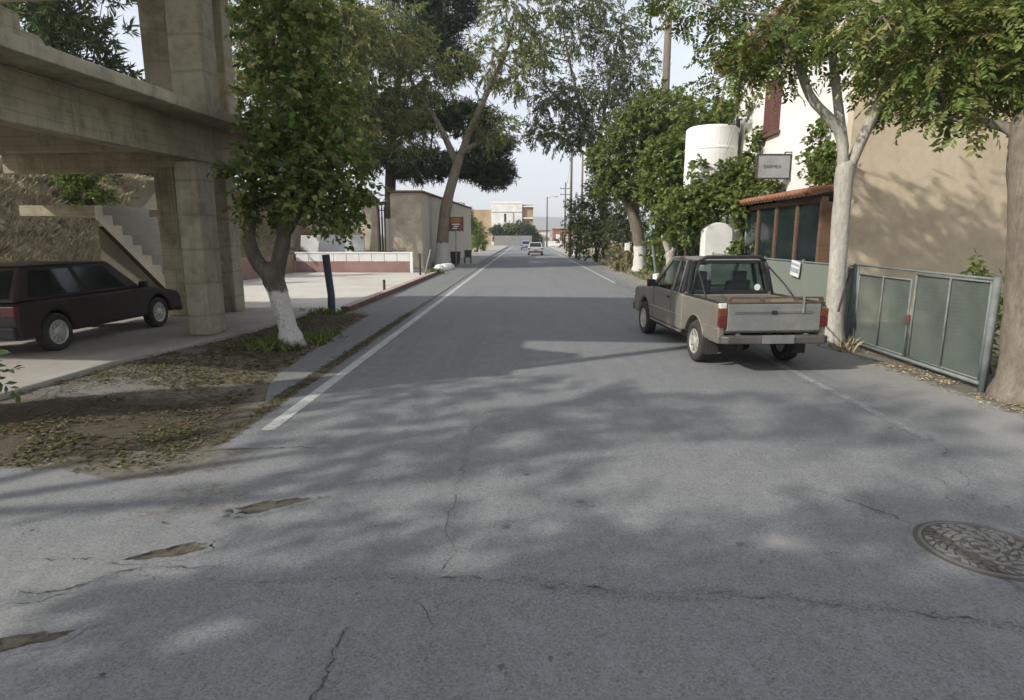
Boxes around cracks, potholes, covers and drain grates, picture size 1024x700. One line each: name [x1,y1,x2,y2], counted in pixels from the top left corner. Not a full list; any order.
pothole [229,495,319,517]
crack [15,565,213,604]
pothole [0,625,88,658]
crack [308,627,349,700]
pothole [112,538,214,565]
manhole cover [912,521,1024,582]
